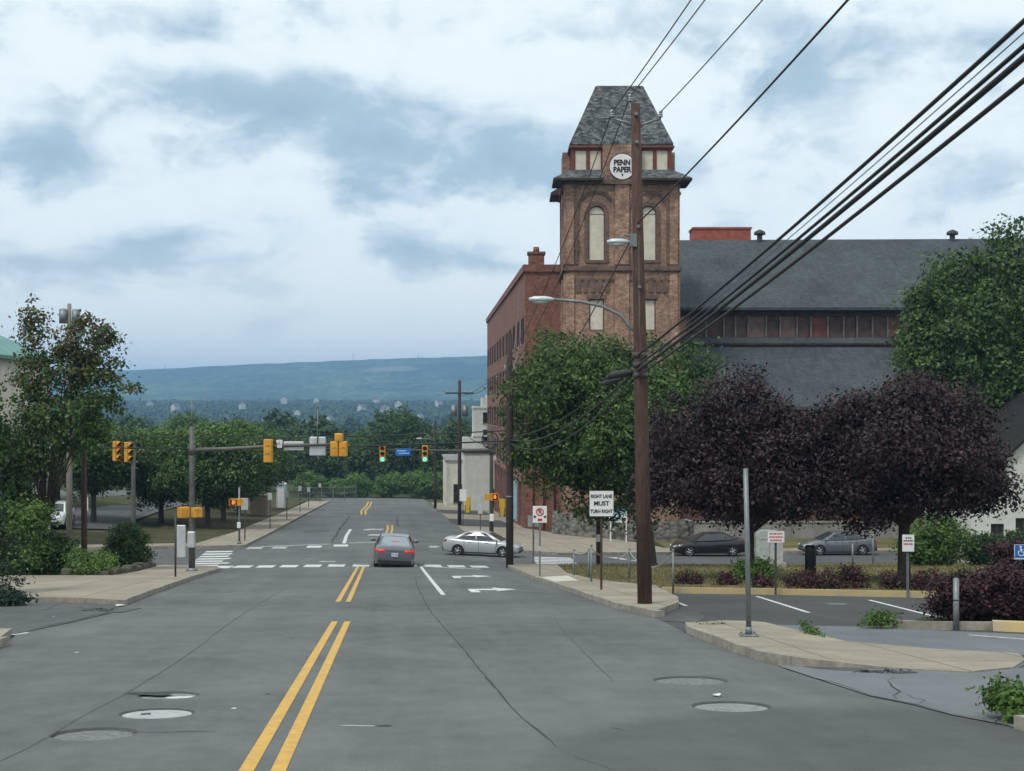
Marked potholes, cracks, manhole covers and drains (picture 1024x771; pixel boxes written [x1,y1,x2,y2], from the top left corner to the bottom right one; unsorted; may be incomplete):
manhole cover [653,676,727,685]
manhole cover [50,728,138,741]
crack [14,603,117,629]
manhole cover [119,708,195,719]
manhole cover [692,701,771,712]
crack [414,577,556,746]
crack [302,516,350,559]
crack [803,674,984,719]
